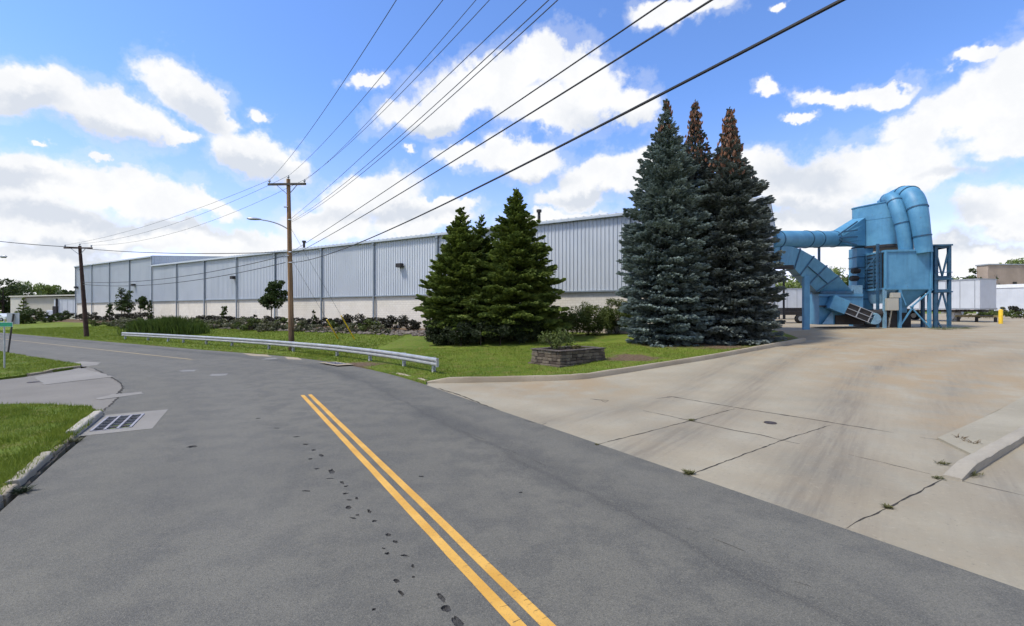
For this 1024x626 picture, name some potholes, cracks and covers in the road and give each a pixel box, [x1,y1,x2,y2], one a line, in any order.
crack [847,456,941,528]
crack [600,396,894,473]
drain grate [79,409,168,436]
